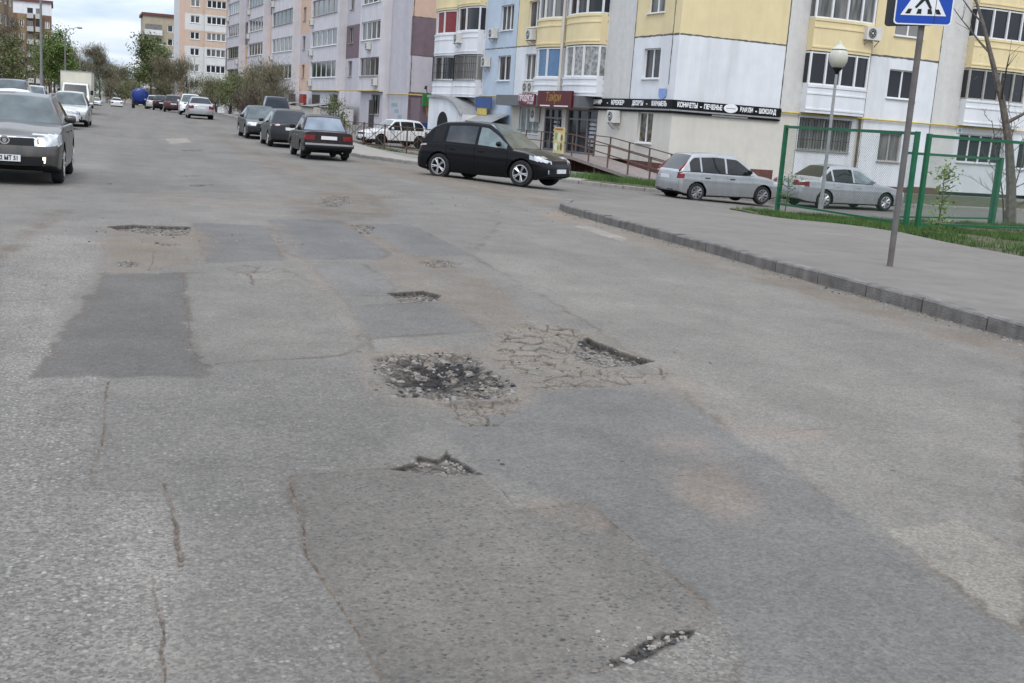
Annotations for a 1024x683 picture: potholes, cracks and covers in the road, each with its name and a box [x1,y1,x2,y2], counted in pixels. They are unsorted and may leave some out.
pothole [386,448,486,477]
pothole [115,260,143,268]
pothole [414,259,469,268]
pothole [580,620,715,681]
crack [84,380,190,683]
pothole [565,337,660,369]
crack [428,321,681,429]
pothole [365,352,523,403]
pothole [387,290,445,304]
crack [281,467,390,683]
pothole [106,224,194,236]
